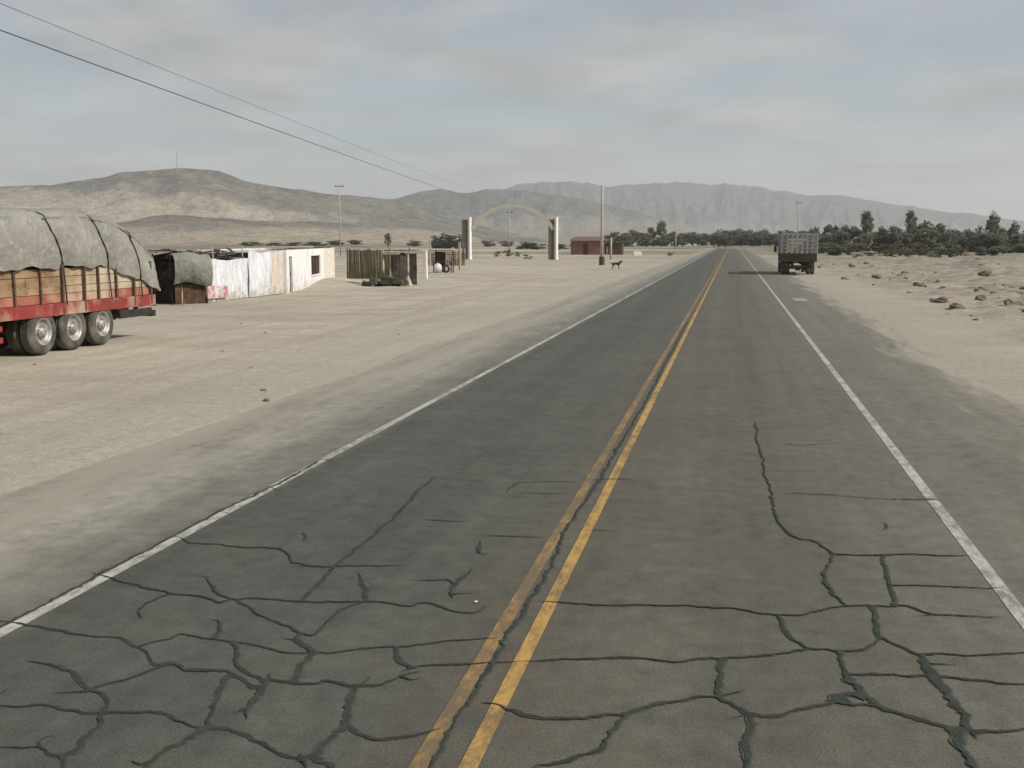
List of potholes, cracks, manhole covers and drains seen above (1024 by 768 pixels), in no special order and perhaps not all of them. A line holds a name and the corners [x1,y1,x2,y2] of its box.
crack [0,421,1024,768]
